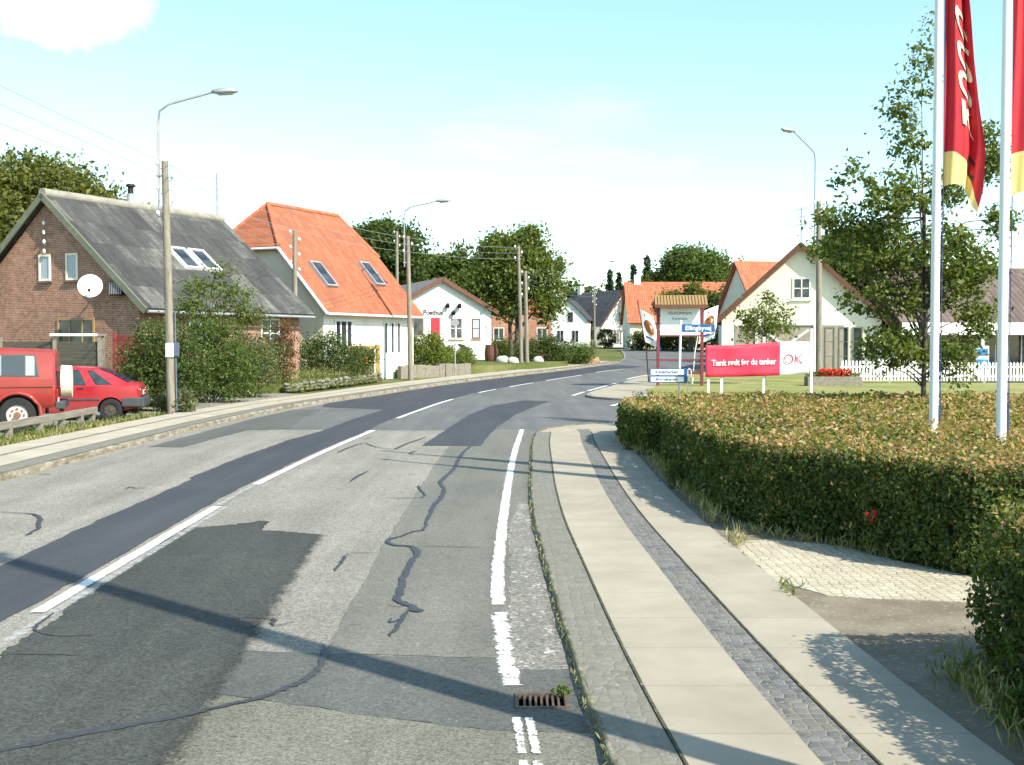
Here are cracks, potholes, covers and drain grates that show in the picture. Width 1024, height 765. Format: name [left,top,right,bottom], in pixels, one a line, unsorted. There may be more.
drain grate [515,692,569,709]
